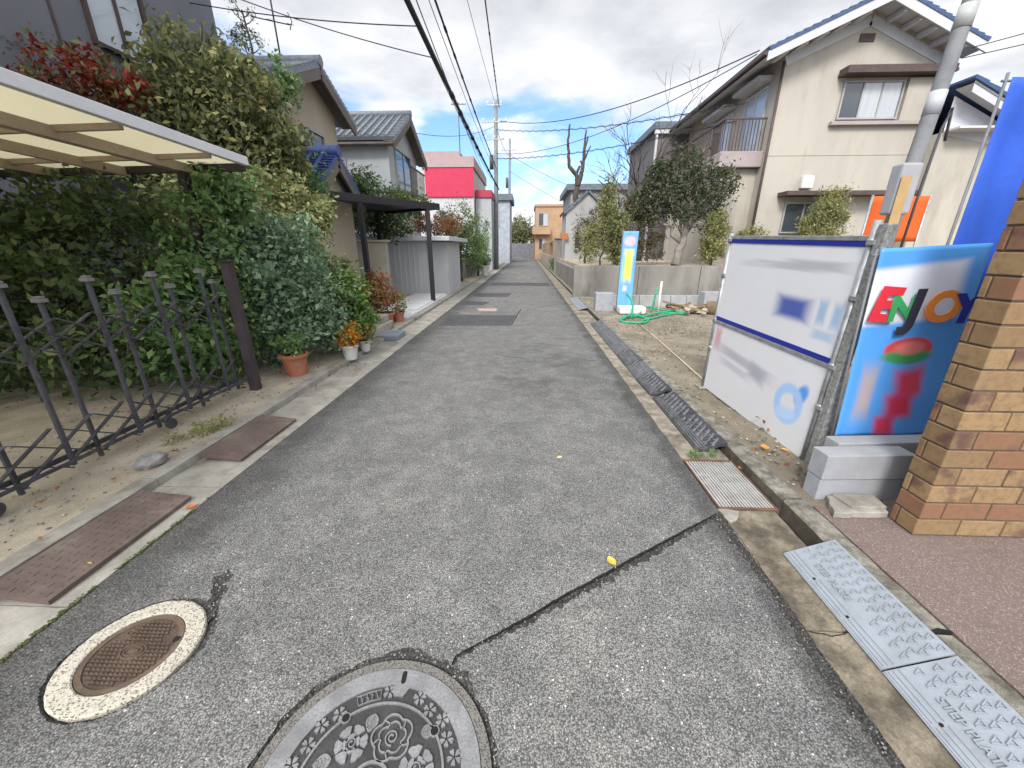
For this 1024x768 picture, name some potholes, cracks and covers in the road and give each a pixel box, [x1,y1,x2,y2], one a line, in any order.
manhole cover [253,660,492,768]
manhole cover [44,600,208,723]
drain grate [683,459,779,515]
crack [37,514,717,768]
